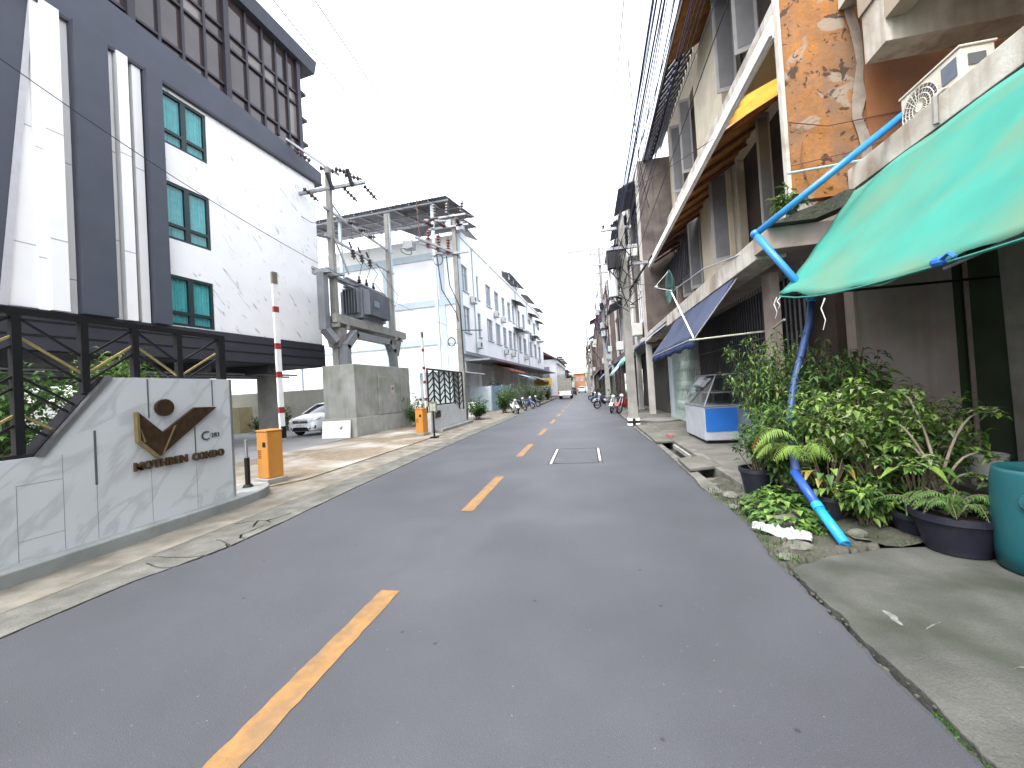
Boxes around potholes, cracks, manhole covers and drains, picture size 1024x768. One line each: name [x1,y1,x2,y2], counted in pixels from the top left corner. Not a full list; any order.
manhole cover [548,448,603,464]
